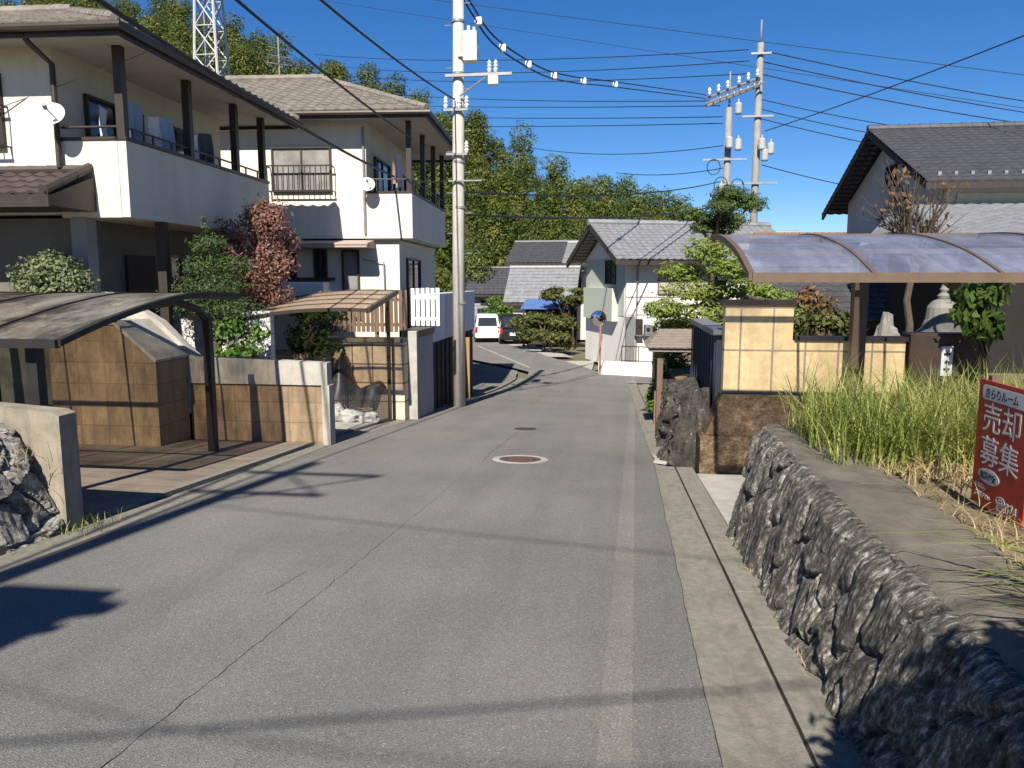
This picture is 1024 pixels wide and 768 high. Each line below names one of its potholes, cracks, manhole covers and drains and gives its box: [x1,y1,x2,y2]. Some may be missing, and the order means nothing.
manhole cover [492,455,548,464]
